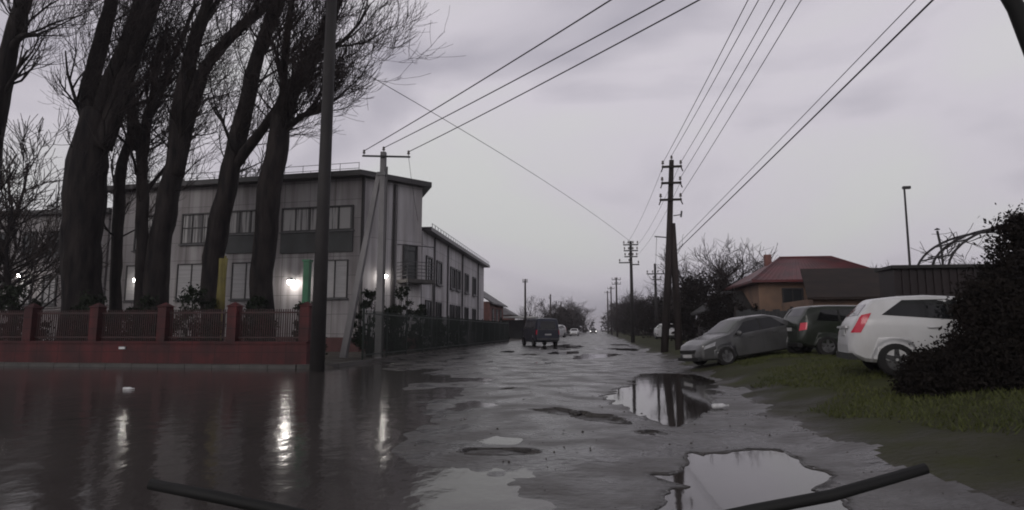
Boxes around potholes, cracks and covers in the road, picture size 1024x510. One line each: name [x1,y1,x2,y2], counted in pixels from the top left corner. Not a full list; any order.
pothole [600,373,724,428]
pothole [646,449,853,510]
pothole [530,407,632,424]
pothole [456,447,542,456]
